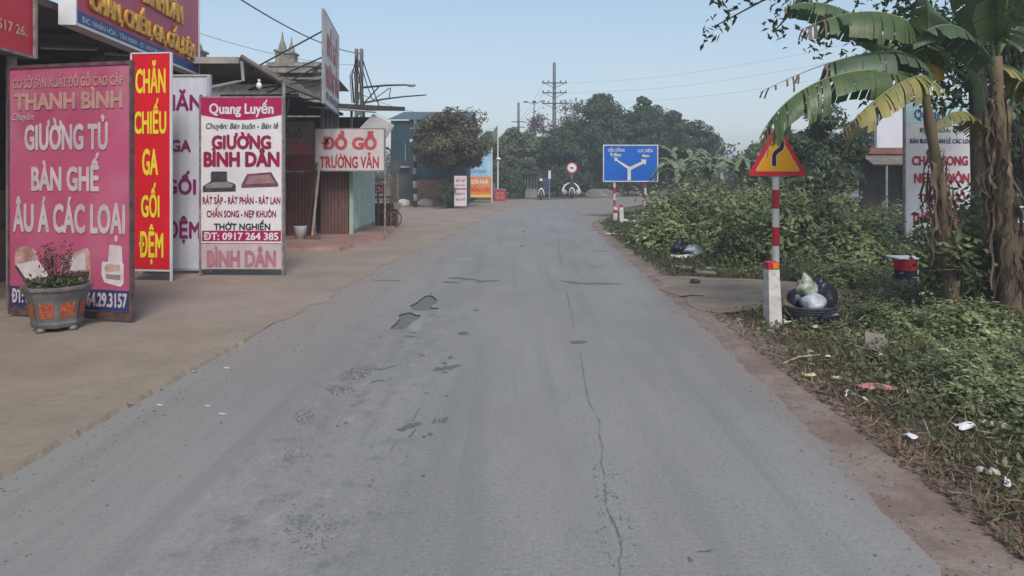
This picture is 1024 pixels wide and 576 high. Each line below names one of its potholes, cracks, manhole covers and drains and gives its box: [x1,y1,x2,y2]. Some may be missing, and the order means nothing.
crack [558,236,622,571]
pothole [410,295,439,311]
pothole [391,312,421,330]
